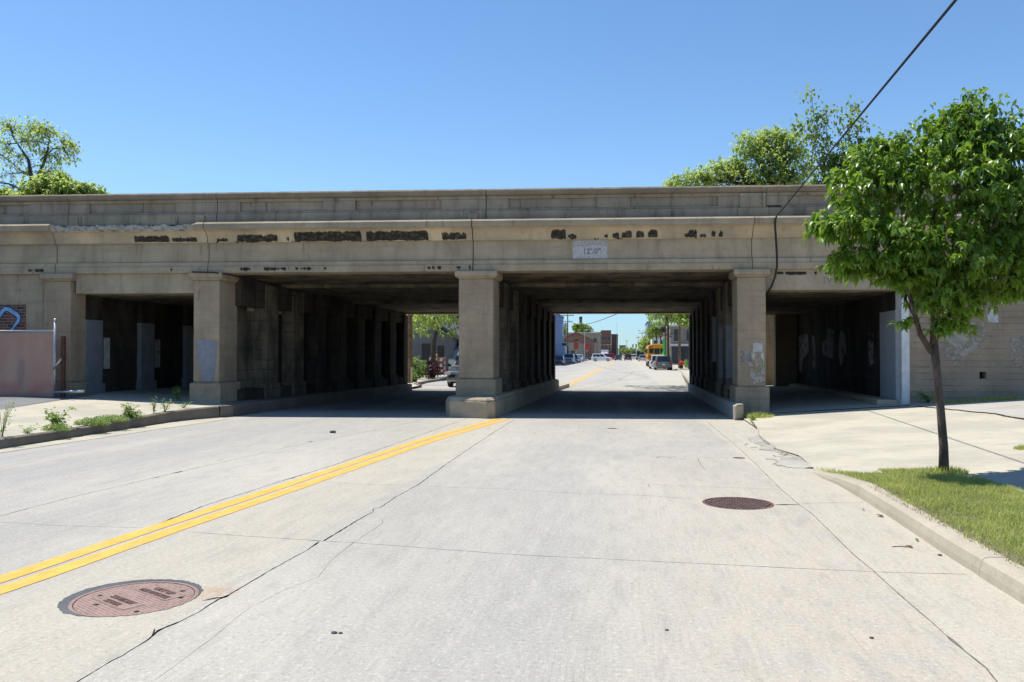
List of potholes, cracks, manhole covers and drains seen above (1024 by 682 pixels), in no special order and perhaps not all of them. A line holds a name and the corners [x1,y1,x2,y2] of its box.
manhole cover [702,497,774,510]
manhole cover [57,579,203,617]
